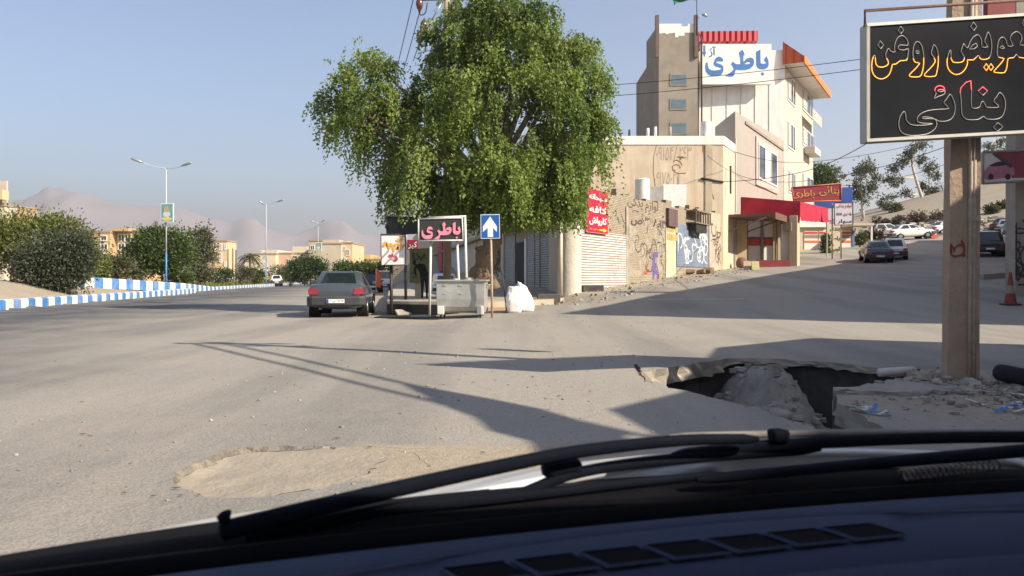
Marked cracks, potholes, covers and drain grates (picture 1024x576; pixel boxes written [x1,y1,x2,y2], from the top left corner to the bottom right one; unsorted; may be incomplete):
pothole [639,358,918,430]
